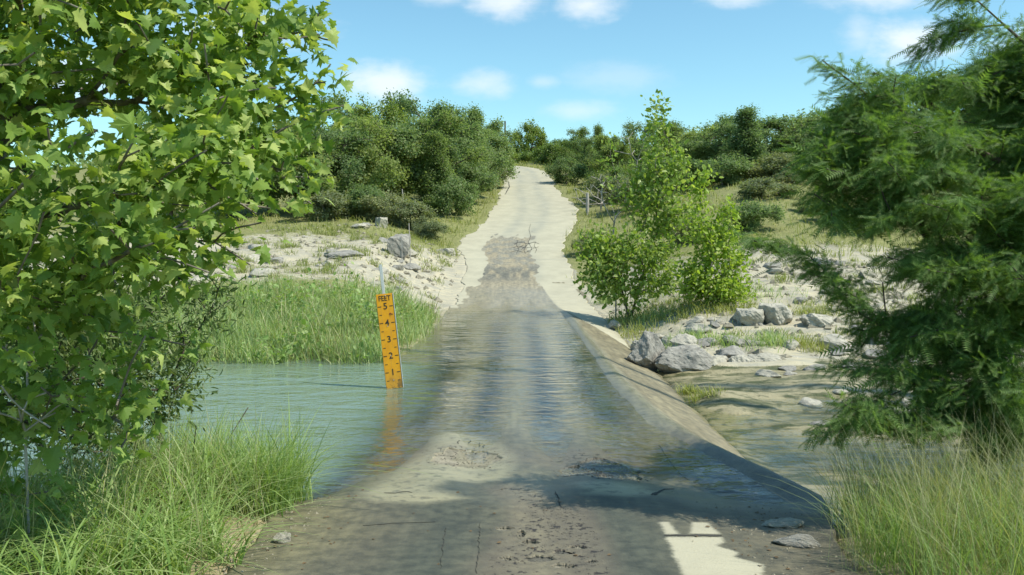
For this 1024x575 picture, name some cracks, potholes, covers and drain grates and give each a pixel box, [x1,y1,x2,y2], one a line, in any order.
pothole [553,457,650,482]
pothole [426,447,508,469]
